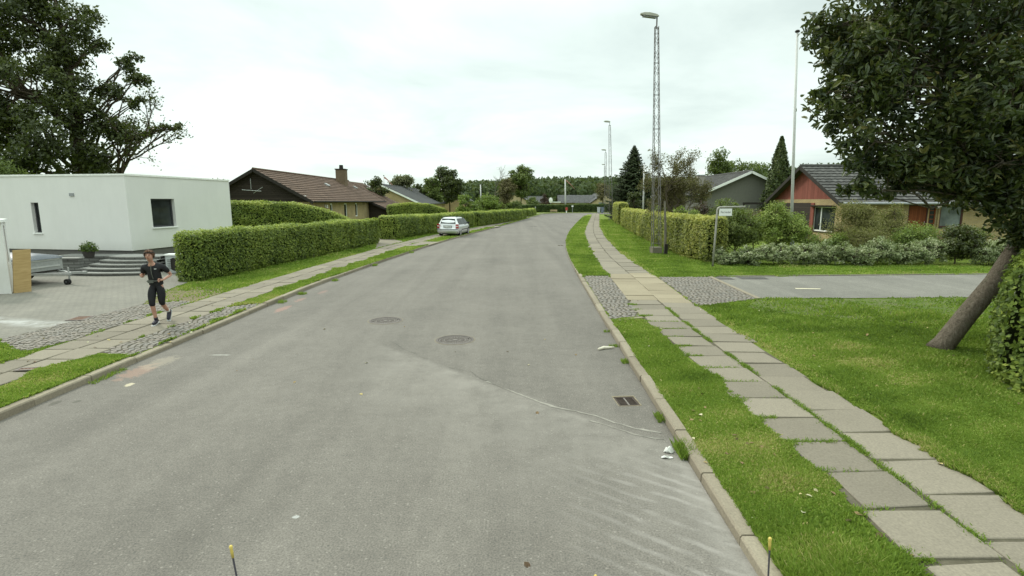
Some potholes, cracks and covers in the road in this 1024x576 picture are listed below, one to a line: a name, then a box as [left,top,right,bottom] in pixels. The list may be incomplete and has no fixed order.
manhole cover [435,335,475,345]
drain grate [611,396,641,407]
